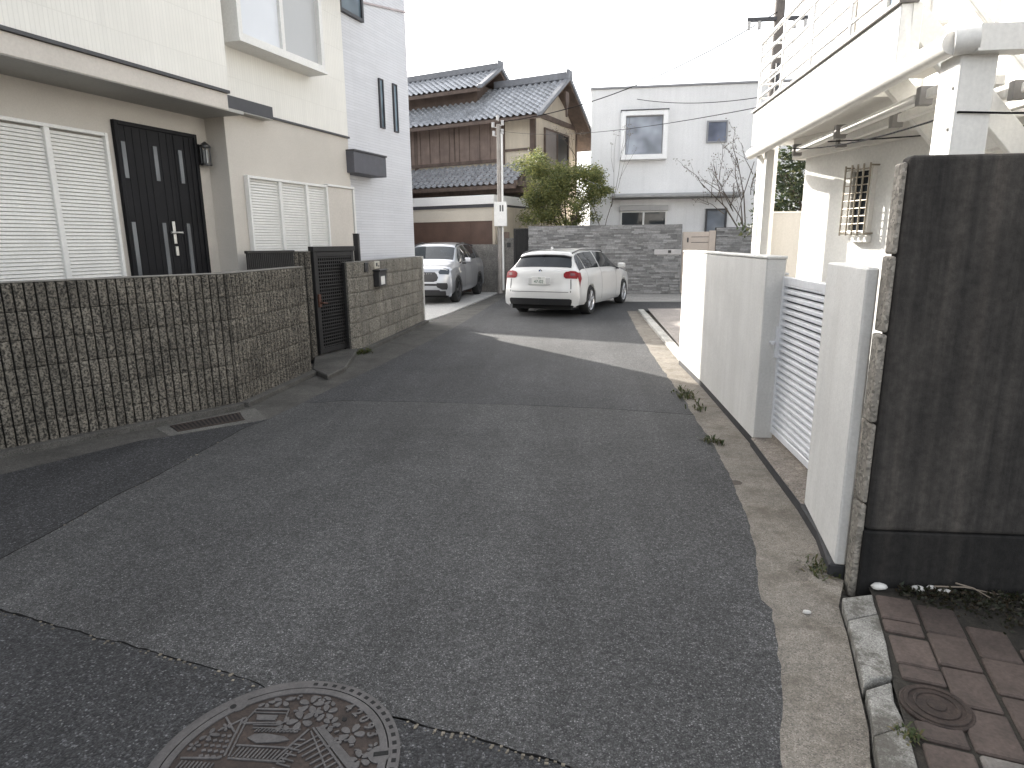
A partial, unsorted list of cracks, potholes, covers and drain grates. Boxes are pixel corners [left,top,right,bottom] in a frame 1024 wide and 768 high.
utility cover [898,684,976,733]
drain grate [156,408,266,436]
manhole cover [147,681,400,768]
crack [0,609,265,688]
